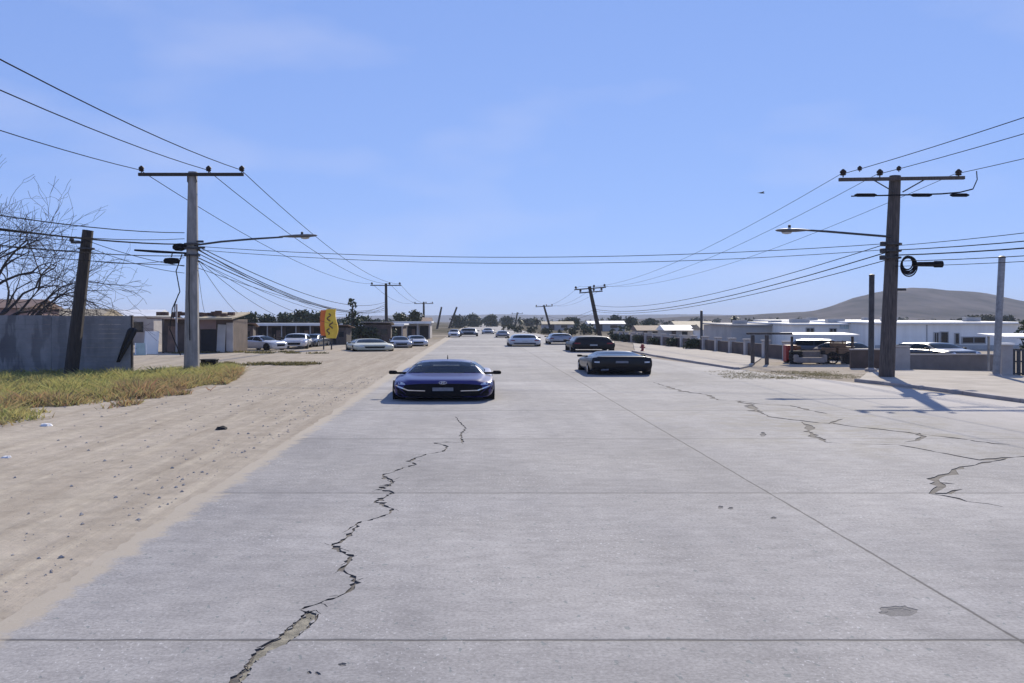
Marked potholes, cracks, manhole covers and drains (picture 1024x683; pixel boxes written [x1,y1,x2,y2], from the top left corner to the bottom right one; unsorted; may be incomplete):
crack [738,401,1024,507]
crack [229,417,467,683]
pothole [878,606,918,616]
crack [653,382,718,400]
